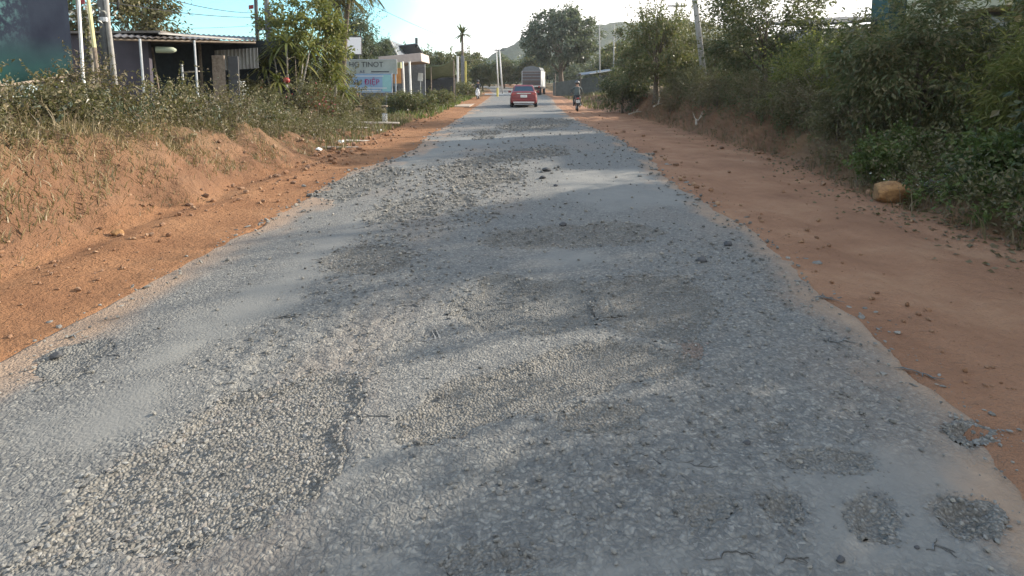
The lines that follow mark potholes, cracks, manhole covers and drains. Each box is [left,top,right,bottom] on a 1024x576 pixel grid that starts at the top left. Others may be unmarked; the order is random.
crack [927,538,957,558]
pothole [741,478,814,535]
pothole [765,442,892,479]
pothole [921,484,1020,554]
pothole [830,481,910,552]
crack [779,554,809,564]
pothole [0,368,378,576]
pothole [939,411,1014,449]
crack [704,550,756,560]
